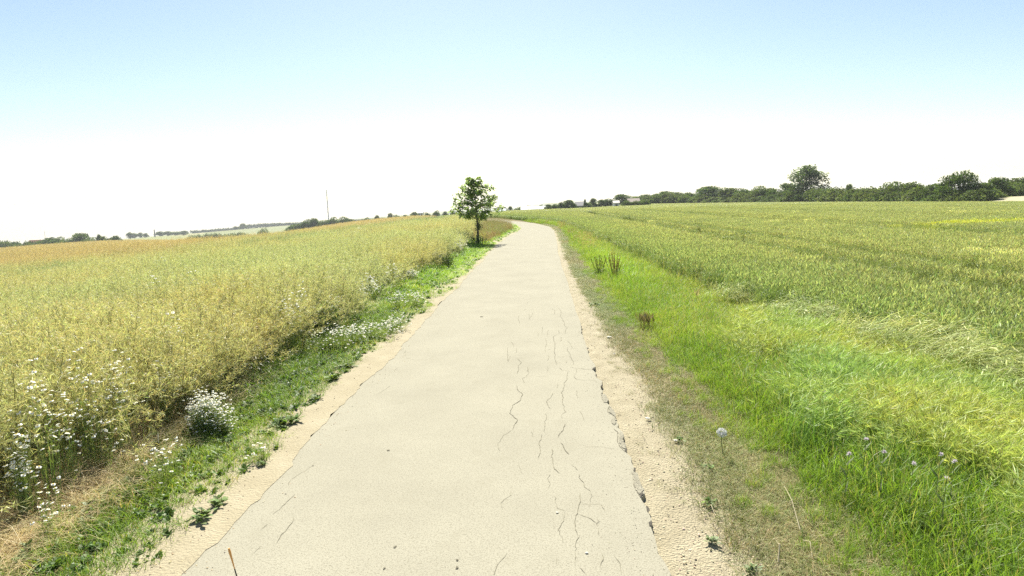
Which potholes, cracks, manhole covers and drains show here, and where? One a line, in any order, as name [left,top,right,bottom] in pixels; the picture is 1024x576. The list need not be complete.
crack [497,313,605,569]
